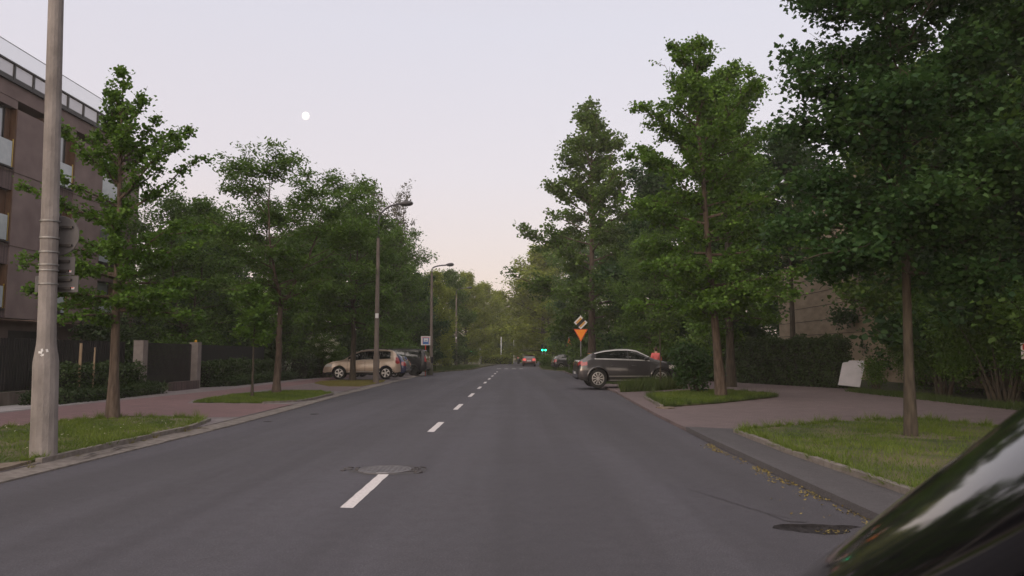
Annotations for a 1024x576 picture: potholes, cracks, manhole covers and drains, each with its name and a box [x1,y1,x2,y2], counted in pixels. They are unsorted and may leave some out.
manhole cover [340,465,428,475]
